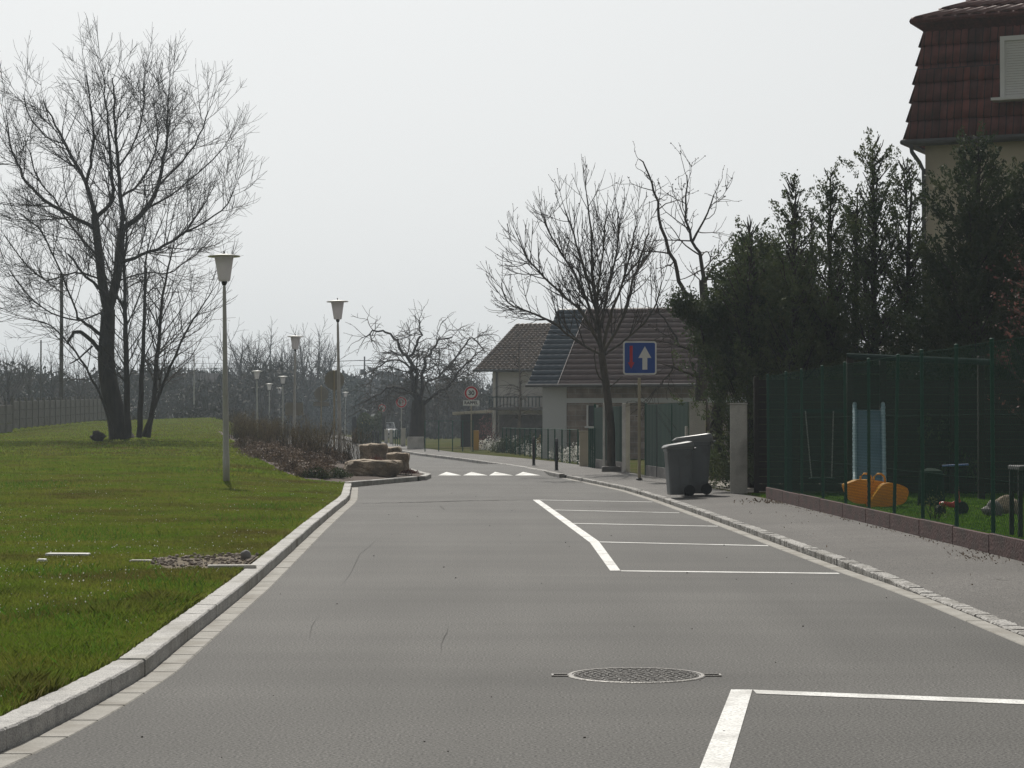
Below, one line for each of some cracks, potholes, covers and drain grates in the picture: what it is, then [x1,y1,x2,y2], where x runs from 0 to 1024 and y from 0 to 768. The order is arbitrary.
manhole cover [551,667,722,683]
